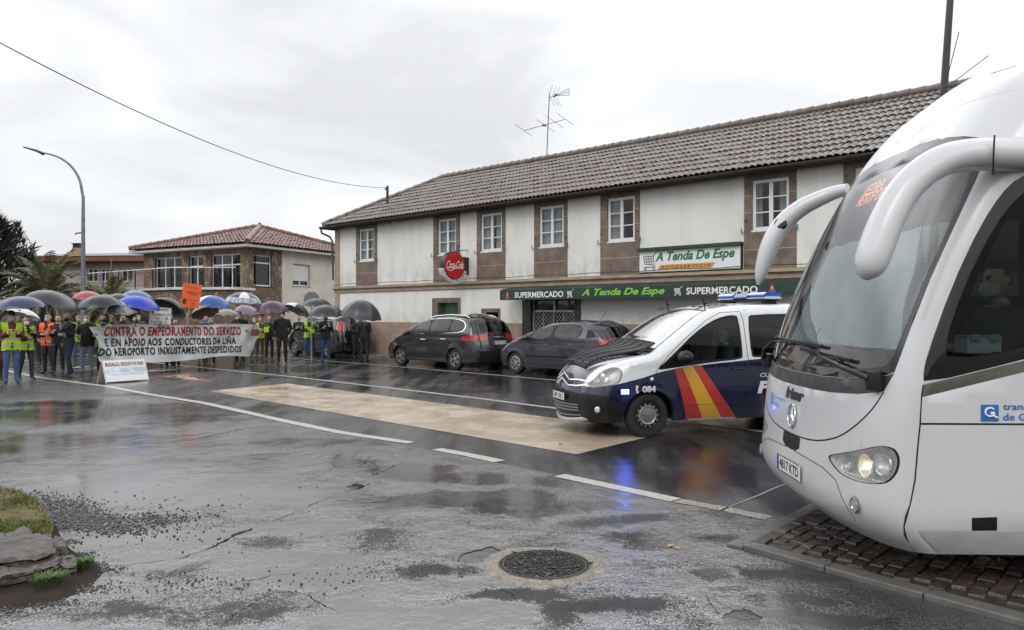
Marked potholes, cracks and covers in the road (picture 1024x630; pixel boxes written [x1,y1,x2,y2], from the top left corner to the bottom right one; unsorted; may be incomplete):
pothole [722,609,763,628]
manhole cover [483,547,610,588]
crack [221,572,341,625]
